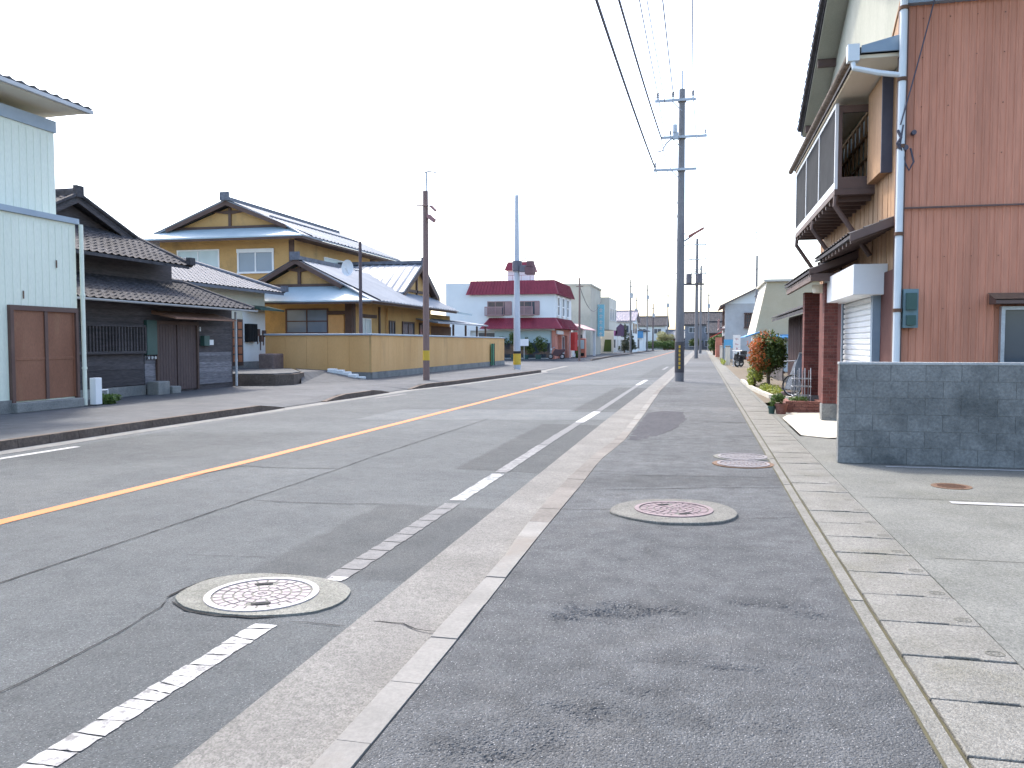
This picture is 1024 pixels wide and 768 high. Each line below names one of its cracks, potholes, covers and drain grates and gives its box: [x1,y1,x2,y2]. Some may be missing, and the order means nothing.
crack [0,555,342,692]
manhole cover [175,573,351,617]
manhole cover [610,499,738,526]
manhole cover [713,453,771,461]
manhole cover [712,459,774,469]
